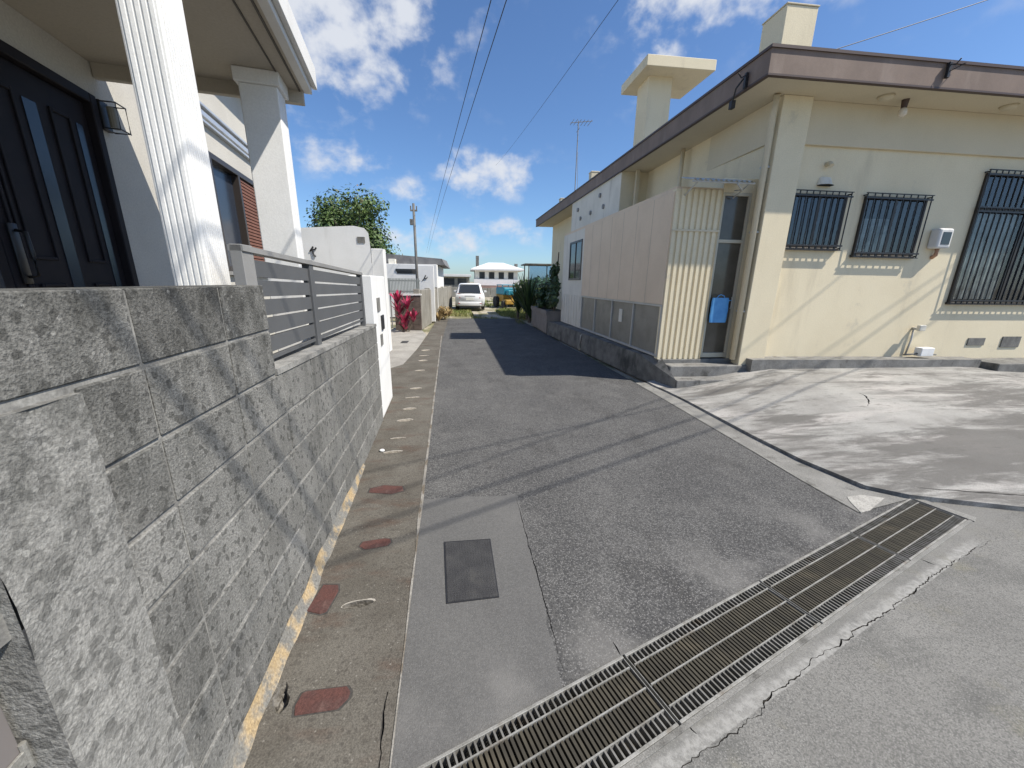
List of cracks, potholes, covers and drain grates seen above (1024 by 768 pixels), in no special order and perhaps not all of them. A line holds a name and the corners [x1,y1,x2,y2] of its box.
drain grate [624,581,821,726]
crack [681,541,988,768]
crack [378,694,388,768]
drain grate [759,532,910,624]
manhole cover [444,539,499,604]
drain grate [417,656,679,768]
